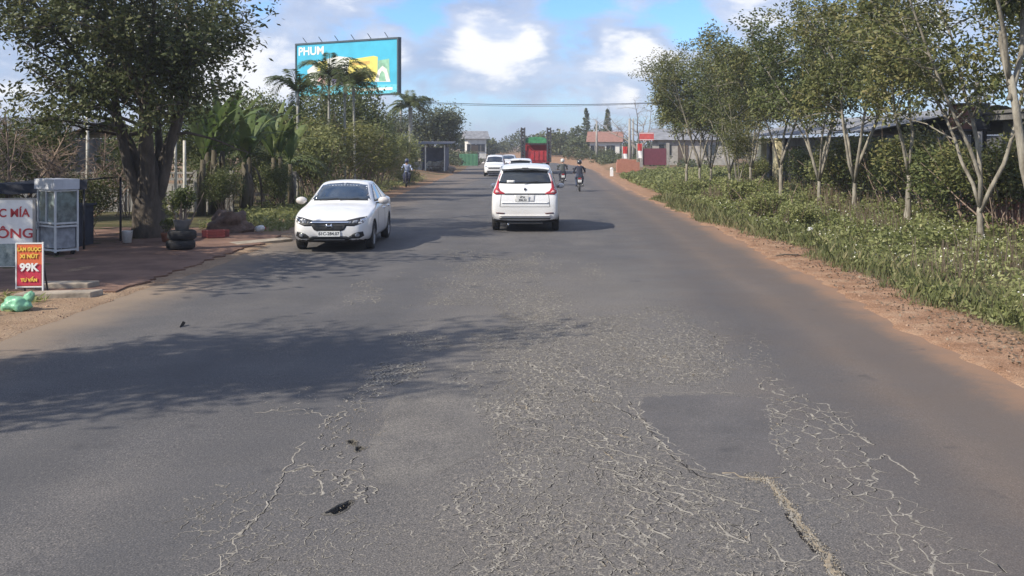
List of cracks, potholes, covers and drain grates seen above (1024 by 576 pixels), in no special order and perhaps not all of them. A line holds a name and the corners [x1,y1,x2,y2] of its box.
pothole [322,500,355,516]
crack [164,252,1007,576]
